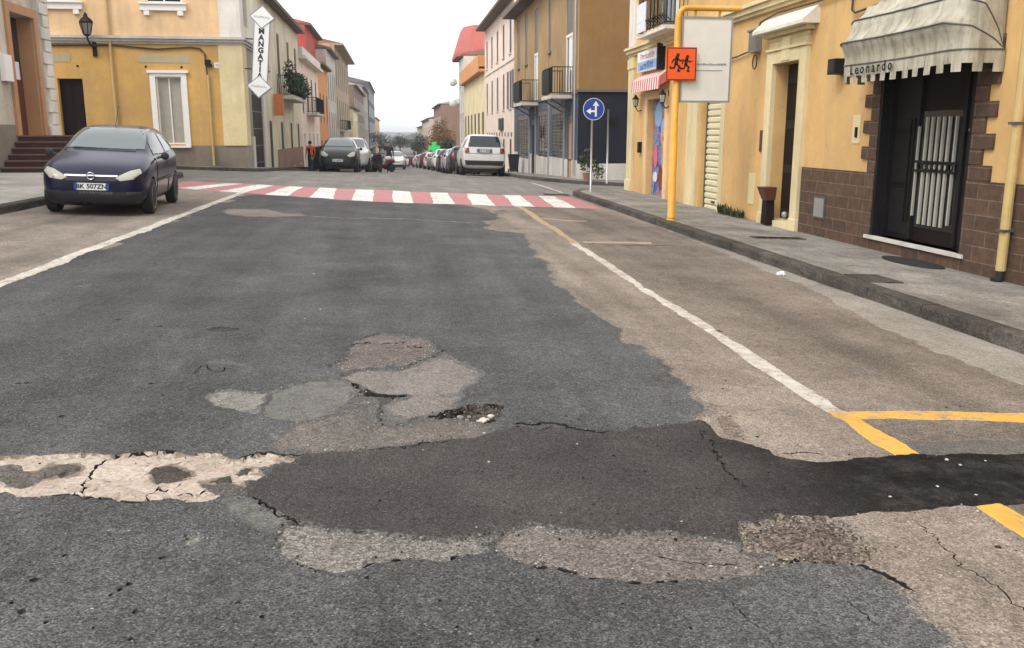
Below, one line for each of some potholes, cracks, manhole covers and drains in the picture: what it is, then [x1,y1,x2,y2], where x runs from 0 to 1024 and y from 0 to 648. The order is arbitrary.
crack [917,523,1024,610]
crack [512,422,608,433]
crack [699,430,744,485]
